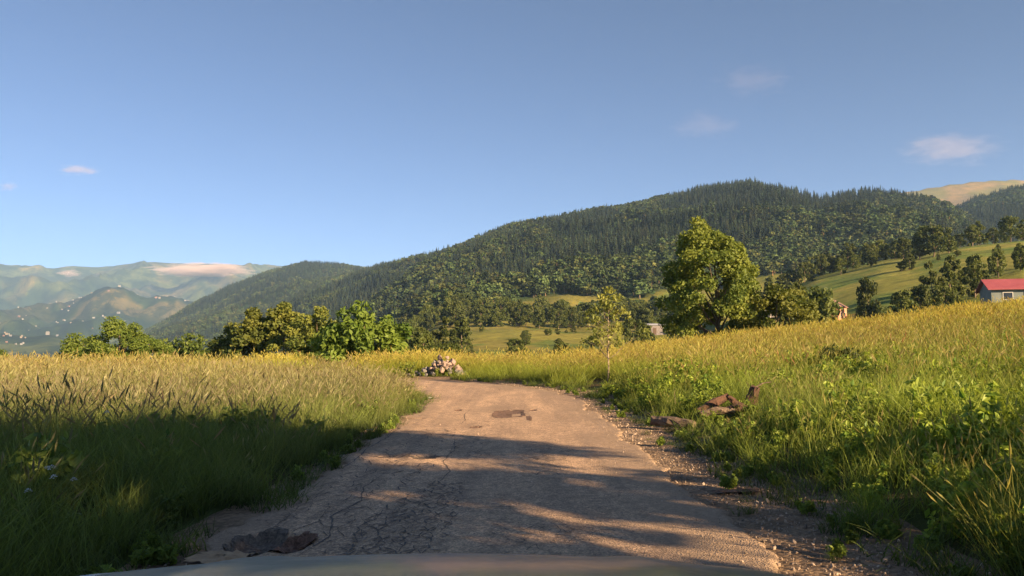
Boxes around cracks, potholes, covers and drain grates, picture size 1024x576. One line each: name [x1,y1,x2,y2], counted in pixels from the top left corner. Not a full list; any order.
pothole [492,410,526,418]
crack [255,411,497,557]
